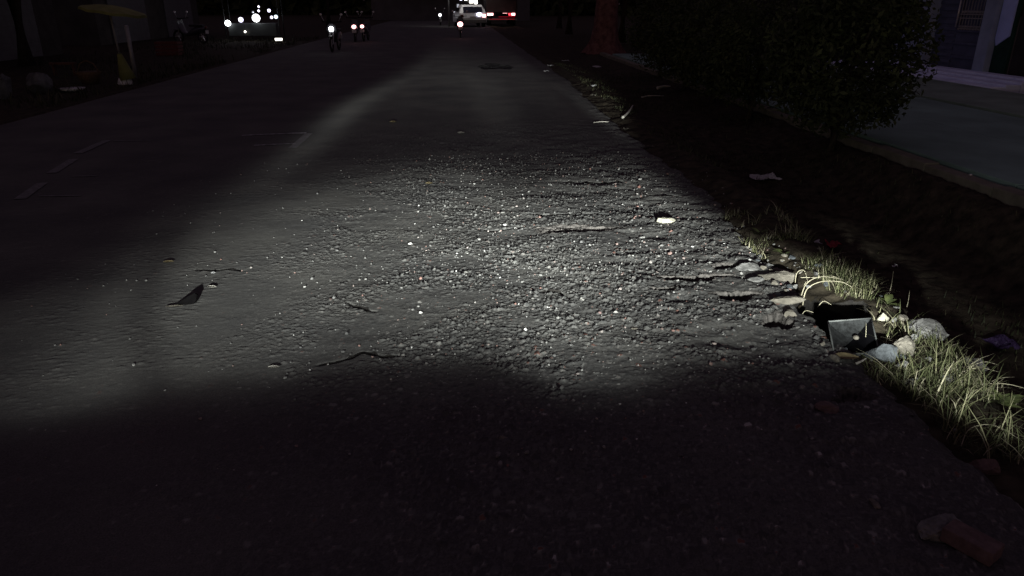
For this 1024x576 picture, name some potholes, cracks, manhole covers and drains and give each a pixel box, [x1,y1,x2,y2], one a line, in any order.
pothole [708,290,765,302]
crack [319,352,398,366]
pothole [760,310,796,331]
pothole [708,262,741,274]
crack [348,303,370,312]
